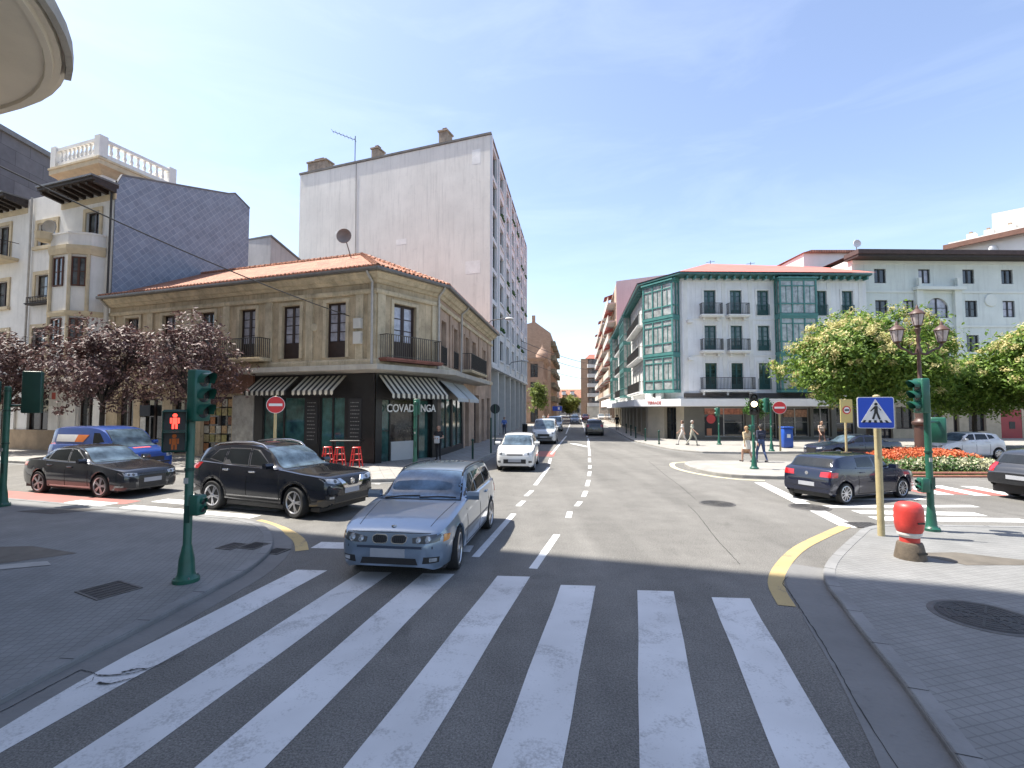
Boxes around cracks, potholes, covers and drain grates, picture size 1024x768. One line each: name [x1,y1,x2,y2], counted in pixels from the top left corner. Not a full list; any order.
manhole cover [926,599,1024,637]
crack [0,653,185,712]
drain grate [237,542,271,550]
